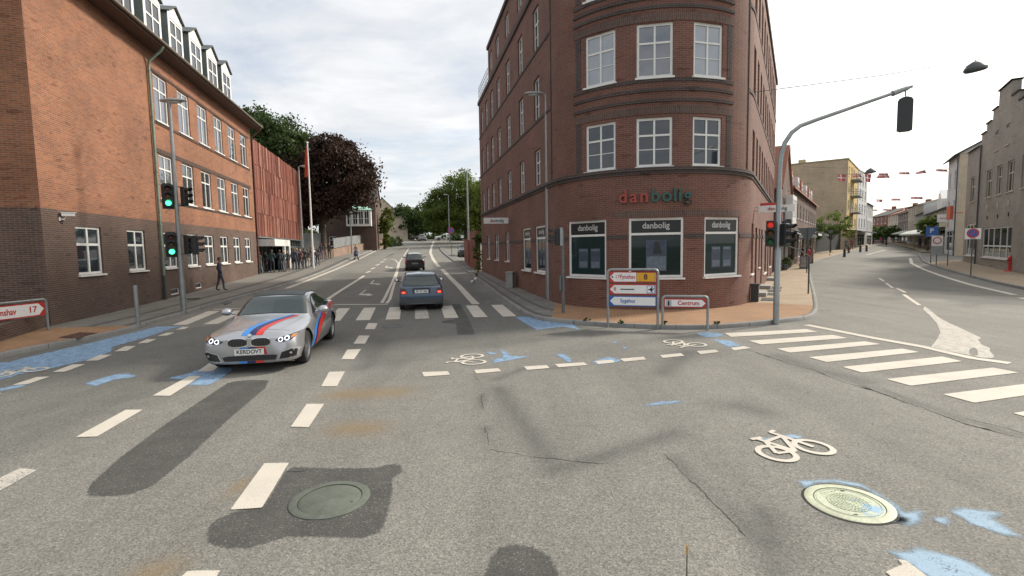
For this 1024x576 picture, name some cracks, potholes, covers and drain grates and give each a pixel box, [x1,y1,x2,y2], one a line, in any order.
crack [478,380,608,464]
manhole cover [288,481,370,520]
crack [664,454,742,532]
manhole cover [801,484,901,525]
